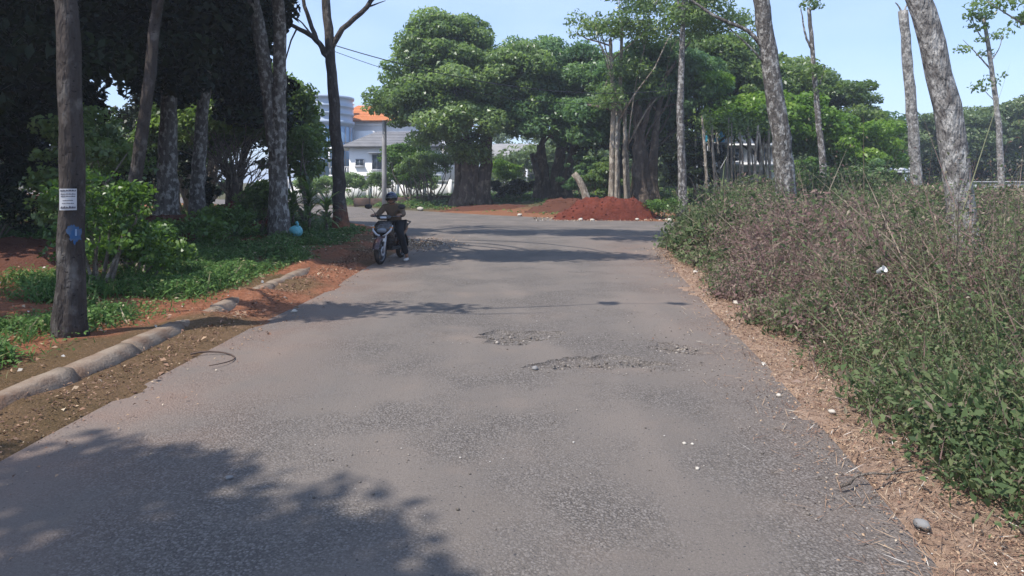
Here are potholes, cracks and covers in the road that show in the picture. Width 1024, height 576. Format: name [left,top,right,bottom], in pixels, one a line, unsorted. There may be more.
pothole [521,354,672,370]
pothole [474,330,566,346]
